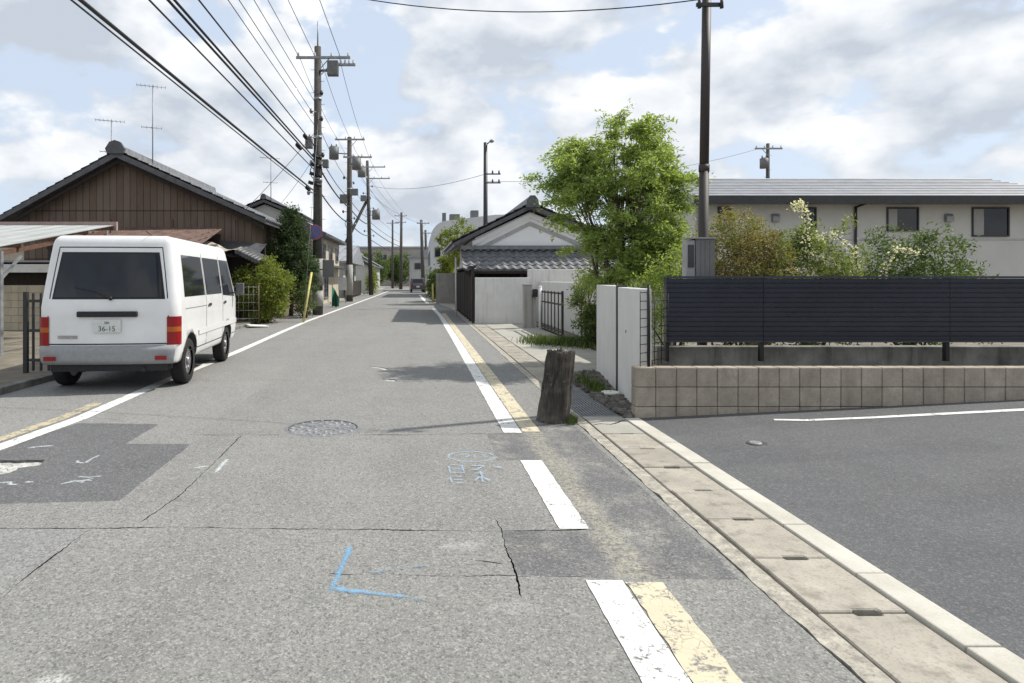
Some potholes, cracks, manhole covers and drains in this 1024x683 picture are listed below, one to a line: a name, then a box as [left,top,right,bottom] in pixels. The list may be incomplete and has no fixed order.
drain grate [571,397,603,406]
crack [0,436,587,596]
manhole cover [284,419,361,437]
